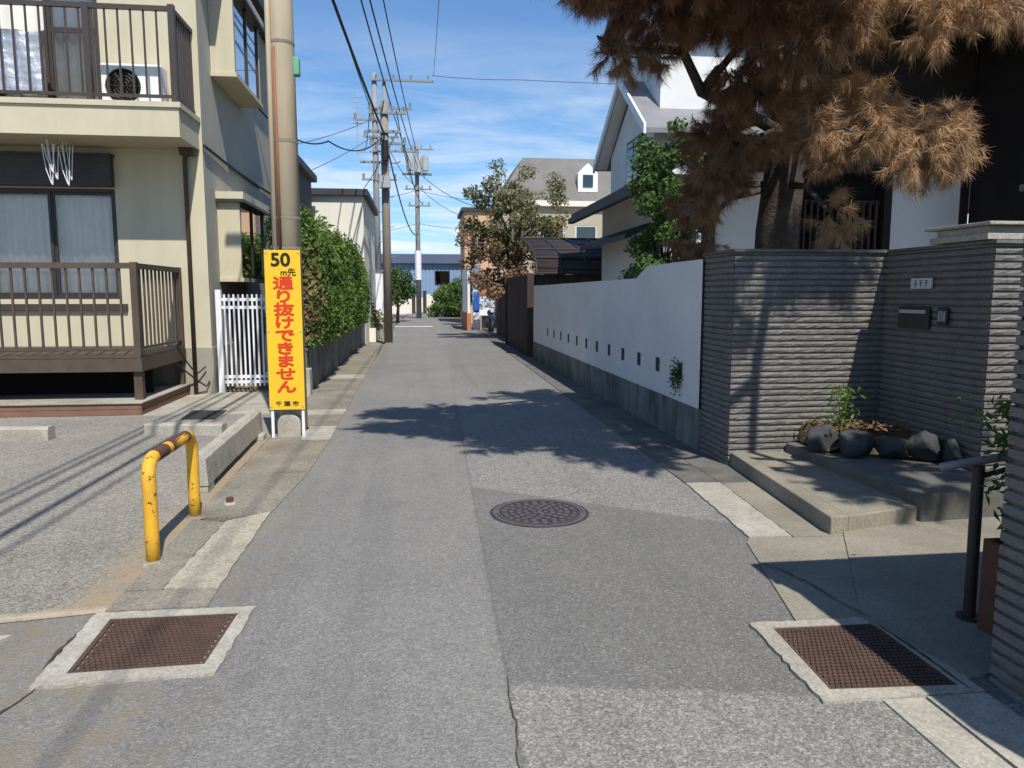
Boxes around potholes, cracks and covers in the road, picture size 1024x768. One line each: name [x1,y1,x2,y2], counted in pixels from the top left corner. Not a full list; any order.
drain grate [750,617,985,705]
drain grate [28,606,256,690]
manhole cover [490,499,589,527]
crack [507,677,520,768]
